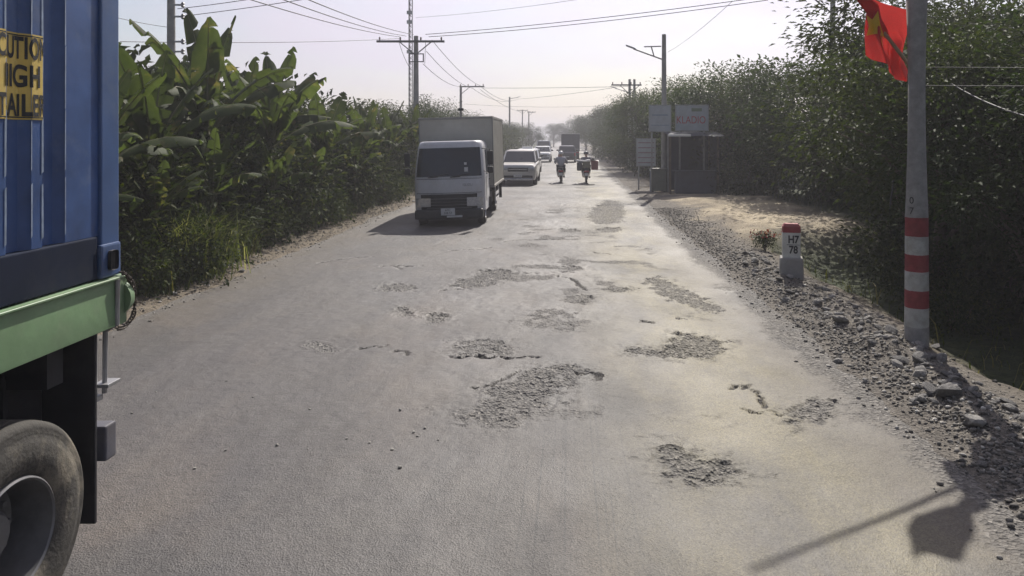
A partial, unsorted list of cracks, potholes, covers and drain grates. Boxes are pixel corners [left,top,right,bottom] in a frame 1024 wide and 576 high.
pothole [449,268,518,289]
pothole [448,338,516,359]
pothole [376,283,419,292]
pothole [649,444,748,488]
crack [730,385,782,417]
pothole [782,397,841,425]
pothole [624,331,731,360]
pothole [507,307,596,333]
pothole [421,312,450,323]
pothole [561,294,596,305]
pothole [640,275,729,314]
pothole [449,363,605,431]
